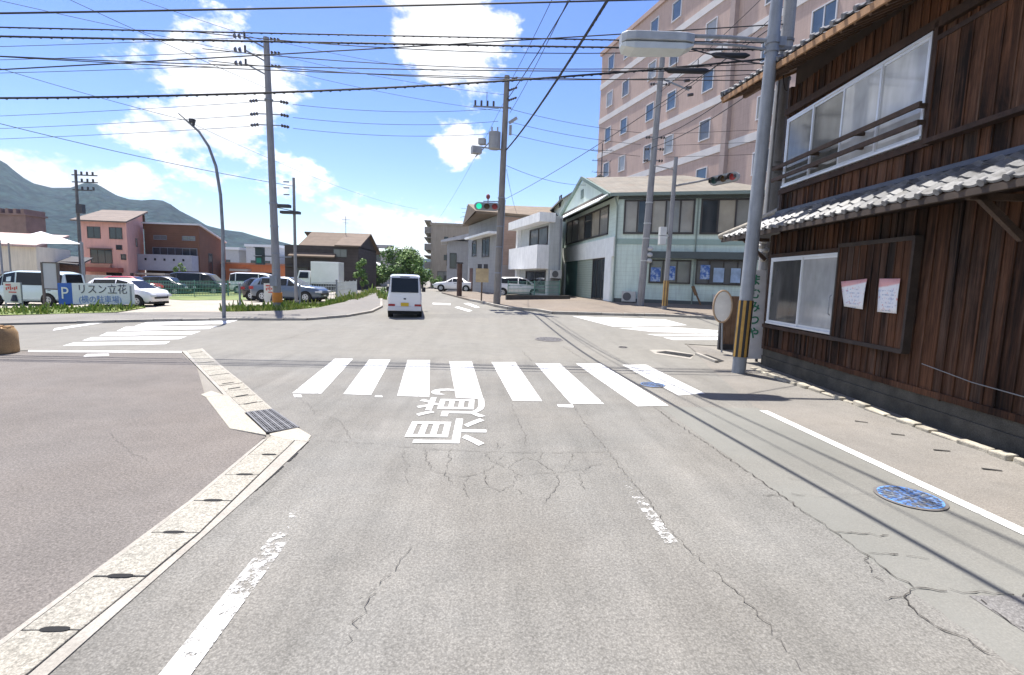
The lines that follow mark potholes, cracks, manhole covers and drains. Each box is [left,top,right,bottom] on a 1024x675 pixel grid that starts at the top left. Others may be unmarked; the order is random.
drain grate [650,350,695,359]
crack [661,411,1024,654]
crack [303,401,598,503]
crack [341,546,412,657]
drain grate [246,408,299,433]
manhole cover [873,485,949,511]
